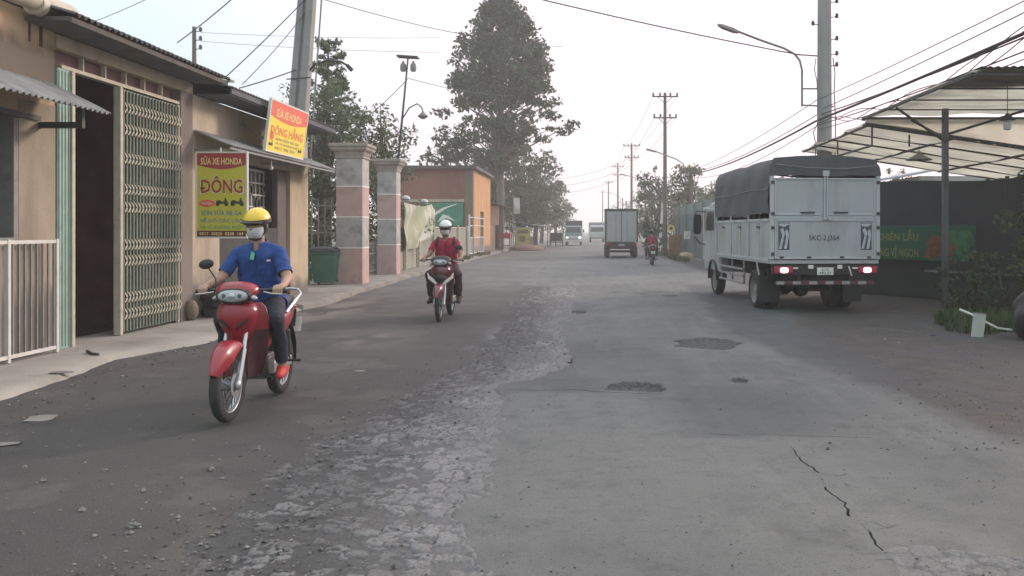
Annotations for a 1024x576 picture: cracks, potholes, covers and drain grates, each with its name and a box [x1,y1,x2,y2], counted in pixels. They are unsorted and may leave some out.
pothole [667,336,748,351]
pothole [600,381,672,395]
crack [702,430,1024,576]
